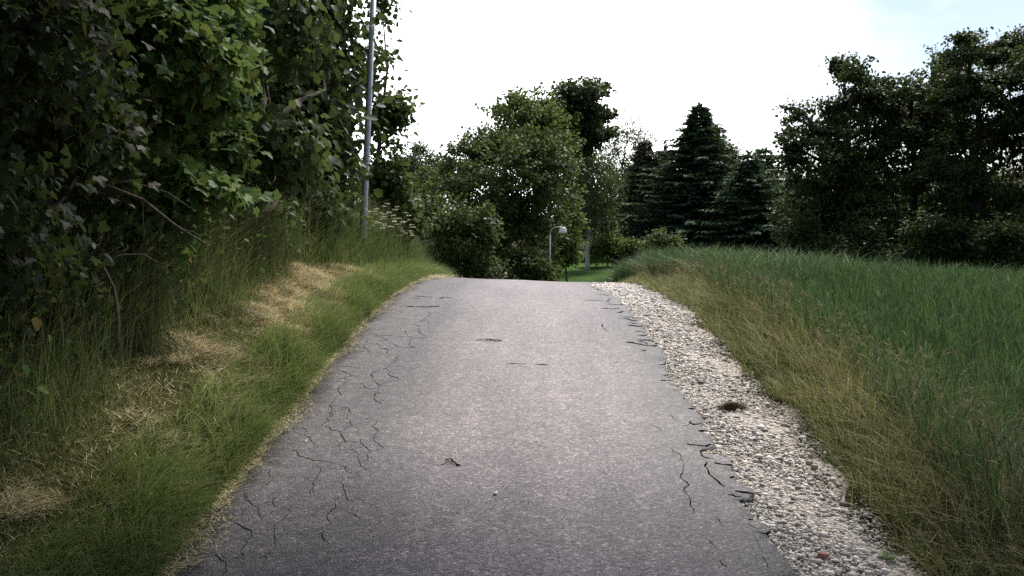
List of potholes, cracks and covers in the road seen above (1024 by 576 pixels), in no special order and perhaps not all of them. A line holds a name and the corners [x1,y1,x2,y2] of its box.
crack [585,294,755,511]
crack [205,312,431,574]
